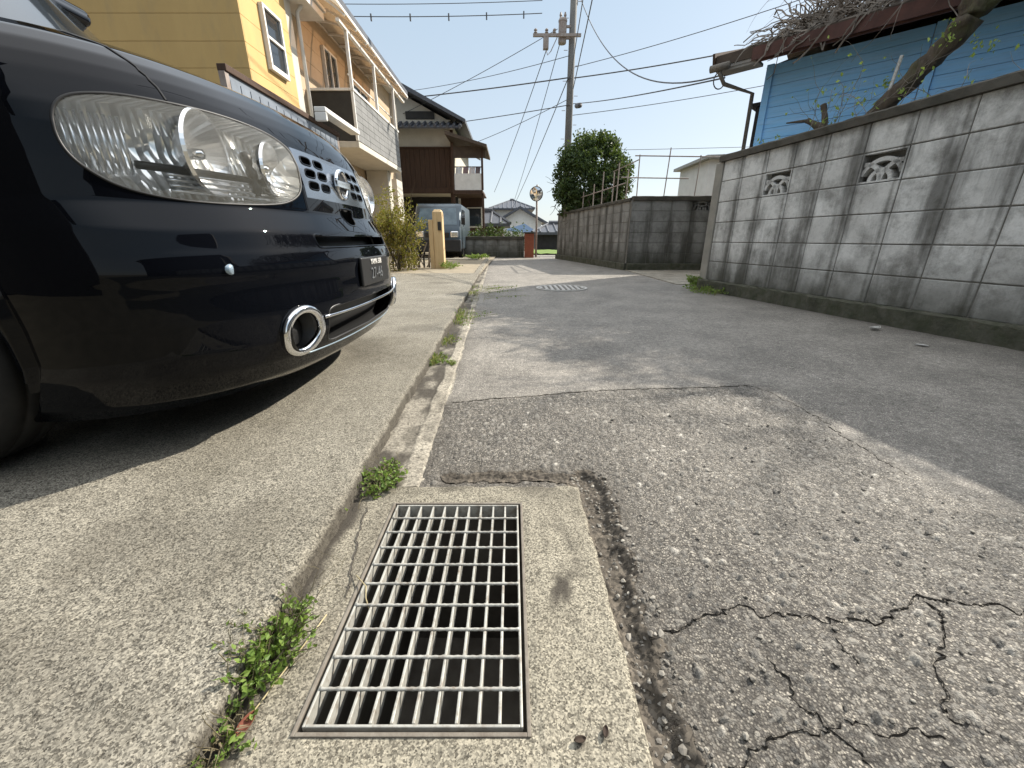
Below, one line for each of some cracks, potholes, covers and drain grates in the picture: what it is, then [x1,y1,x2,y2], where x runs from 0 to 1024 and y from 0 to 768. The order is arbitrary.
crack [650,593,1024,768]
drain grate [290,502,531,738]
crack [345,507,368,600]
pothole [441,469,707,768]
